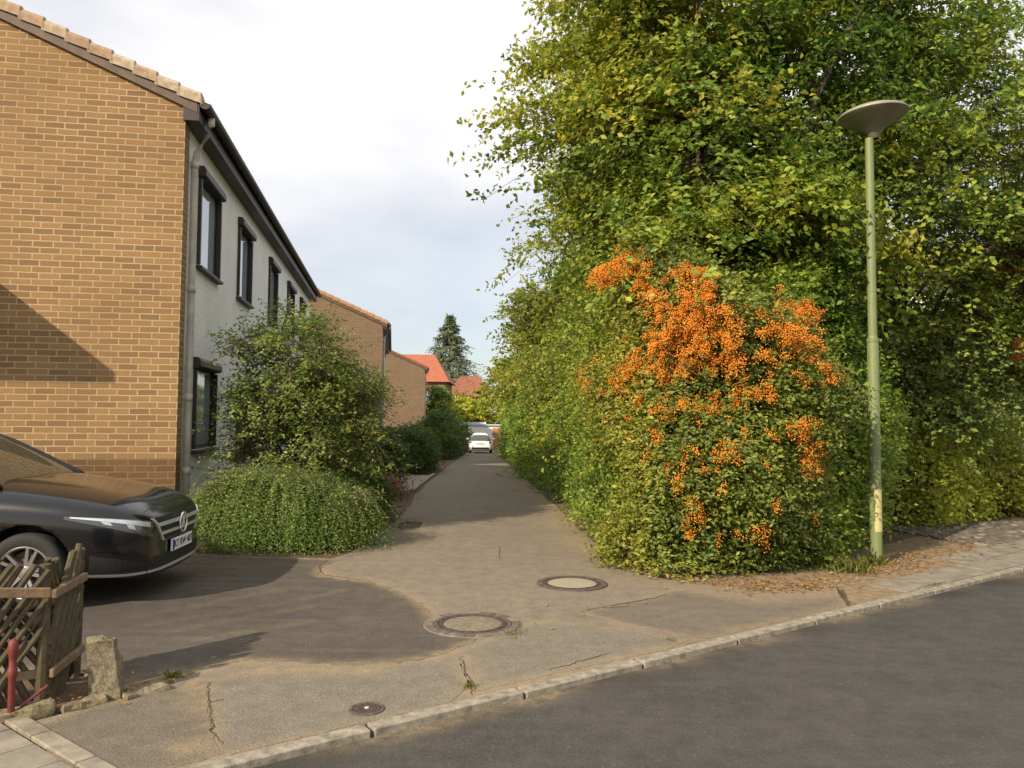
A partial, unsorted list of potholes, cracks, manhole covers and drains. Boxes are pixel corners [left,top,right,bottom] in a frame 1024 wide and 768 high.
manhole cover [423,611,522,638]
manhole cover [537,576,608,592]
utility cover [349,702,385,716]
crack [580,594,667,612]
